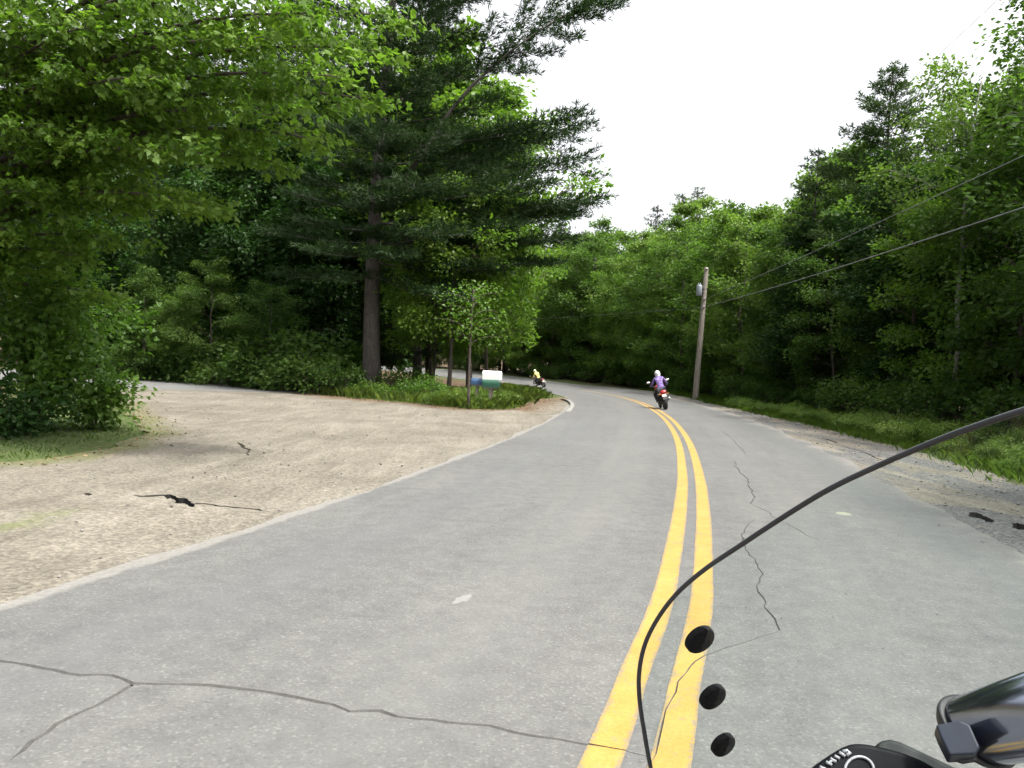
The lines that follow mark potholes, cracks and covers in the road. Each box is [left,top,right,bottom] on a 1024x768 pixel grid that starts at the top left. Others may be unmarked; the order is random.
crack [0,432,818,761]
pothole [968,512,994,523]
